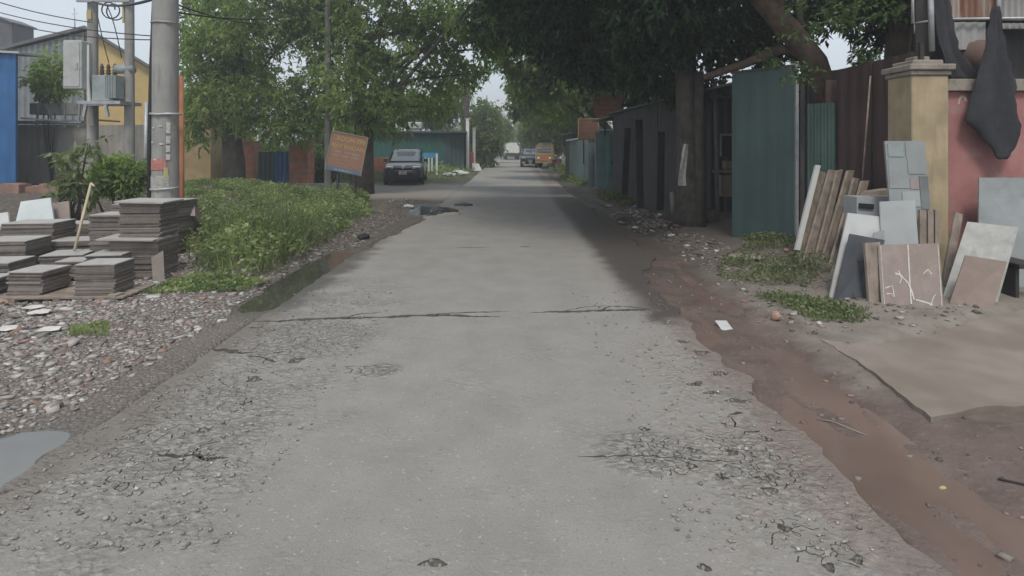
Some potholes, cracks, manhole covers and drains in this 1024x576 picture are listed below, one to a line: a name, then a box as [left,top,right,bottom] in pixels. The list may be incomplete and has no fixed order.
pothole [418,558,448,567]
crack [579,412,809,492]
crack [77,367,272,492]
